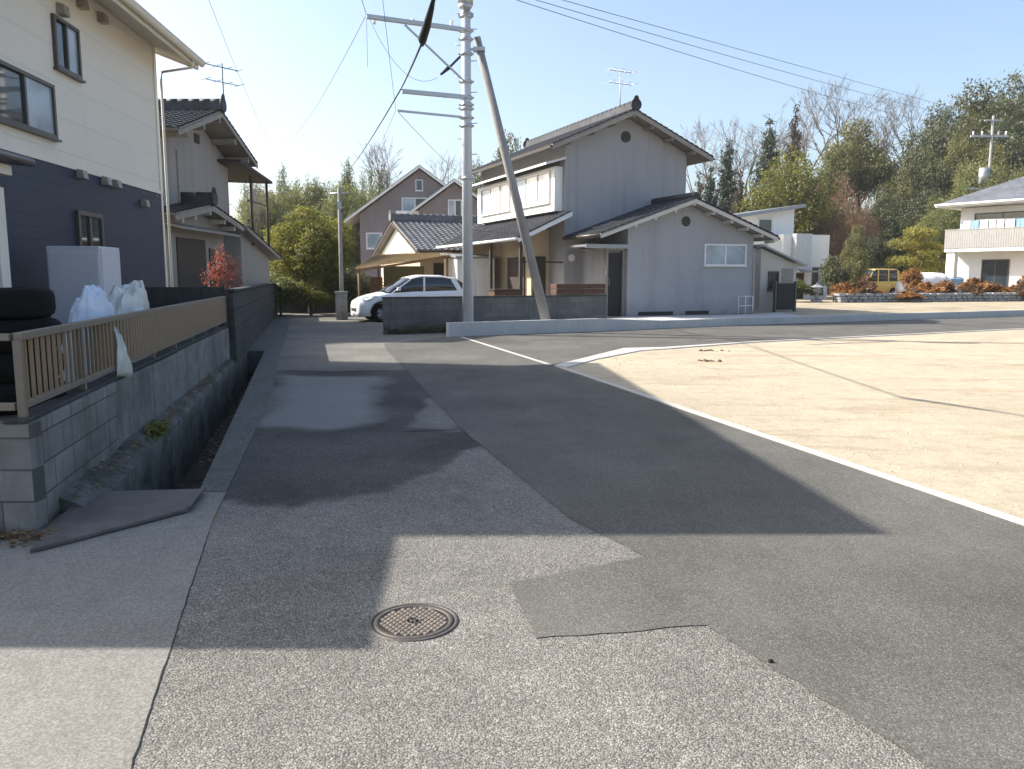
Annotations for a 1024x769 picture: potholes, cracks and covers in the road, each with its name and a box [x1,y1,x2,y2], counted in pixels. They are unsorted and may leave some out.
manhole cover [368,603,459,642]
